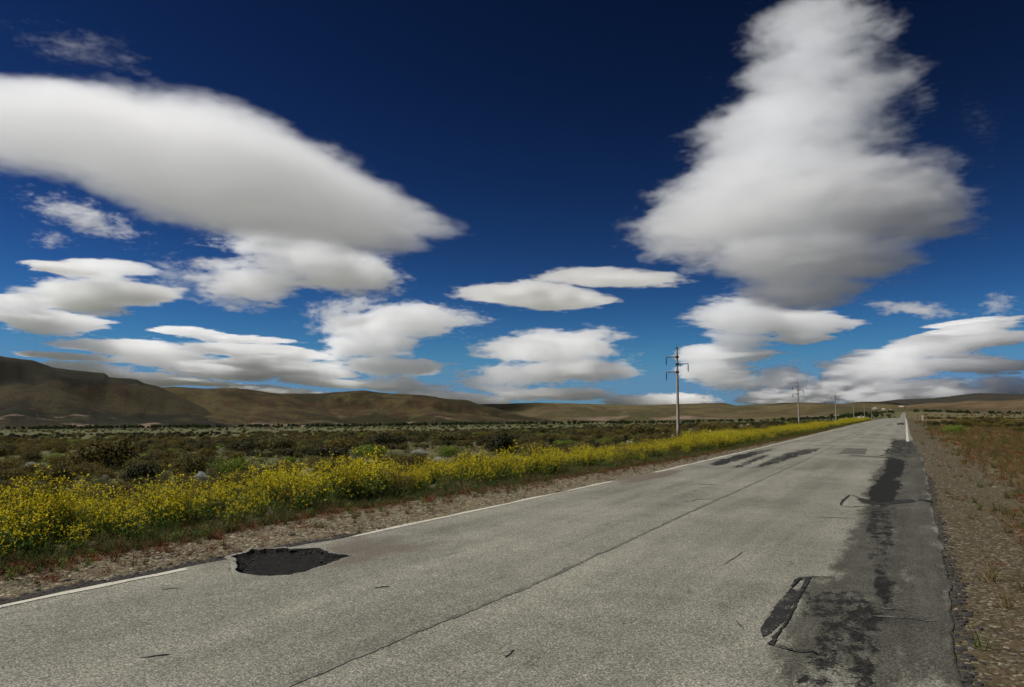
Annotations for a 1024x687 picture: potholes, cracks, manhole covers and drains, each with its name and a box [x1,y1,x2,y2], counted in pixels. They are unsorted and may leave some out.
pothole [225,547,358,578]
